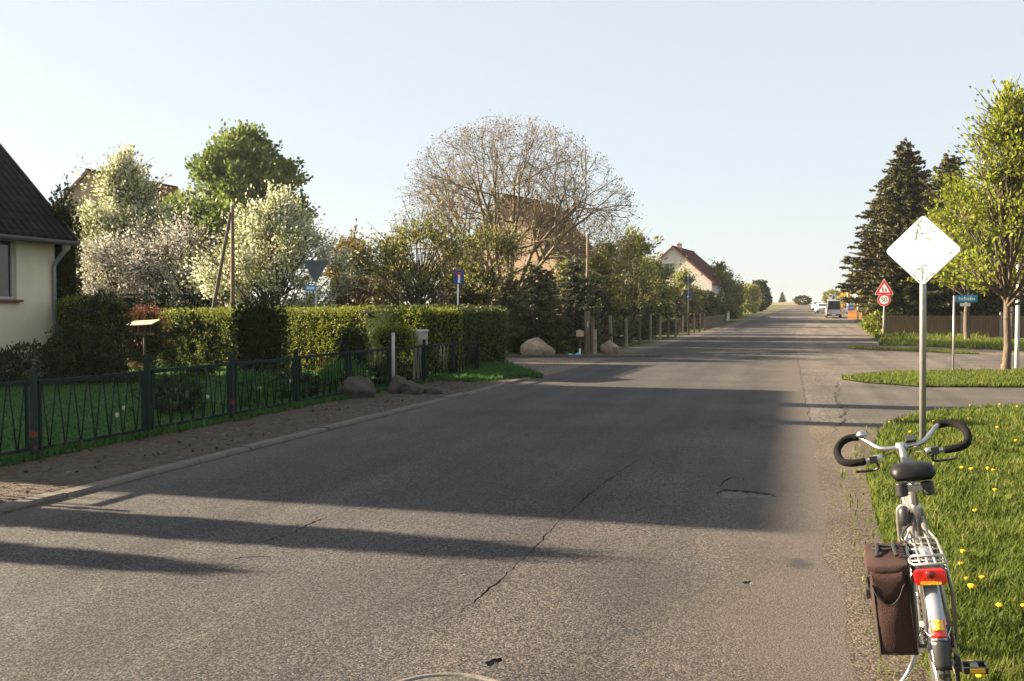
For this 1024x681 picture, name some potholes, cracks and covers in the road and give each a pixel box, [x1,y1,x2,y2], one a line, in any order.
crack [232,517,327,560]
pothole [716,489,777,499]
